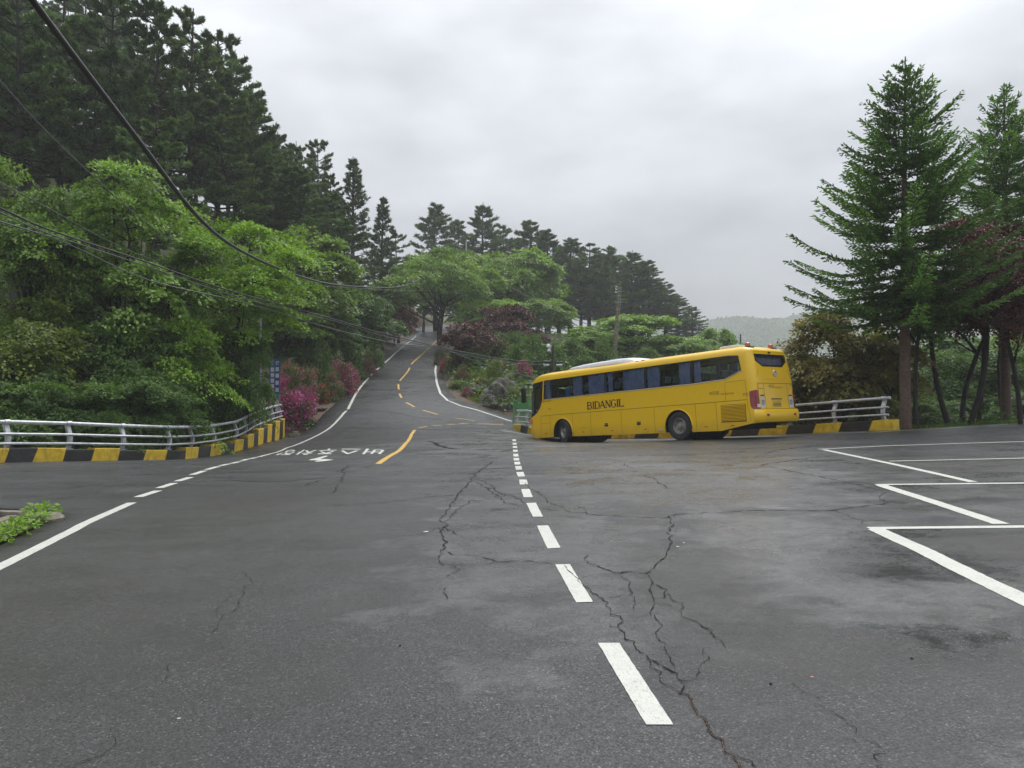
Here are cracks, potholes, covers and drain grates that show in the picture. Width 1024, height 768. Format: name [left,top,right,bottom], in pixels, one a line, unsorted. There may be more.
crack [358,461,548,575]
crack [793,683,885,768]
crack [564,517,757,768]
